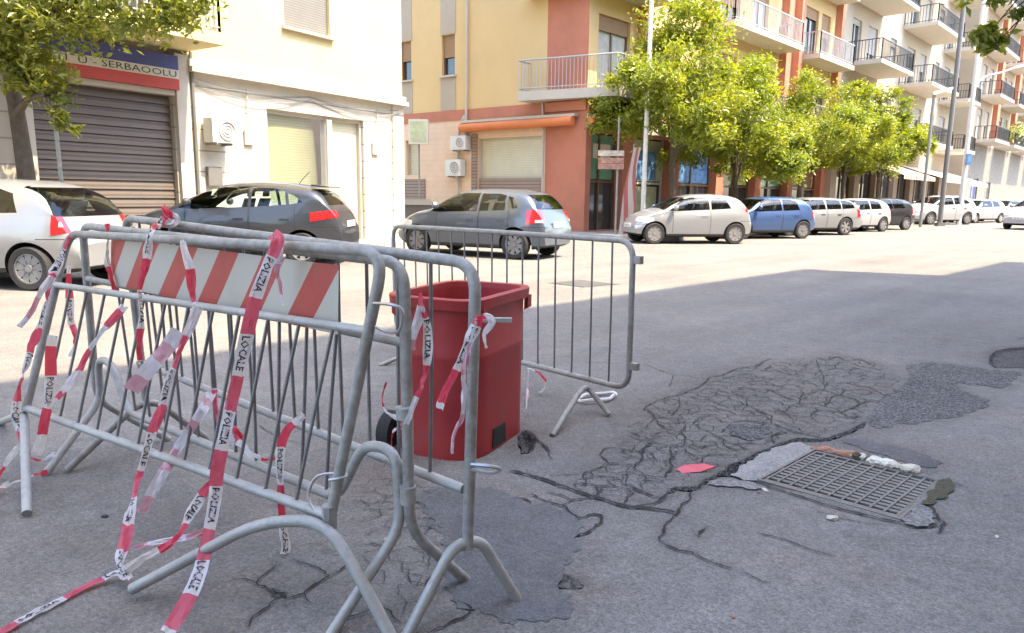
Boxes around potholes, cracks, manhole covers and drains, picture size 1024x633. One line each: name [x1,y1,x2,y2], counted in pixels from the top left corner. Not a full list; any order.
crack [232,559,345,626]
crack [510,356,946,583]
pothole [557,574,584,589]
drain grate [757,448,935,520]
crack [349,478,472,633]
manhole cover [551,280,618,288]
